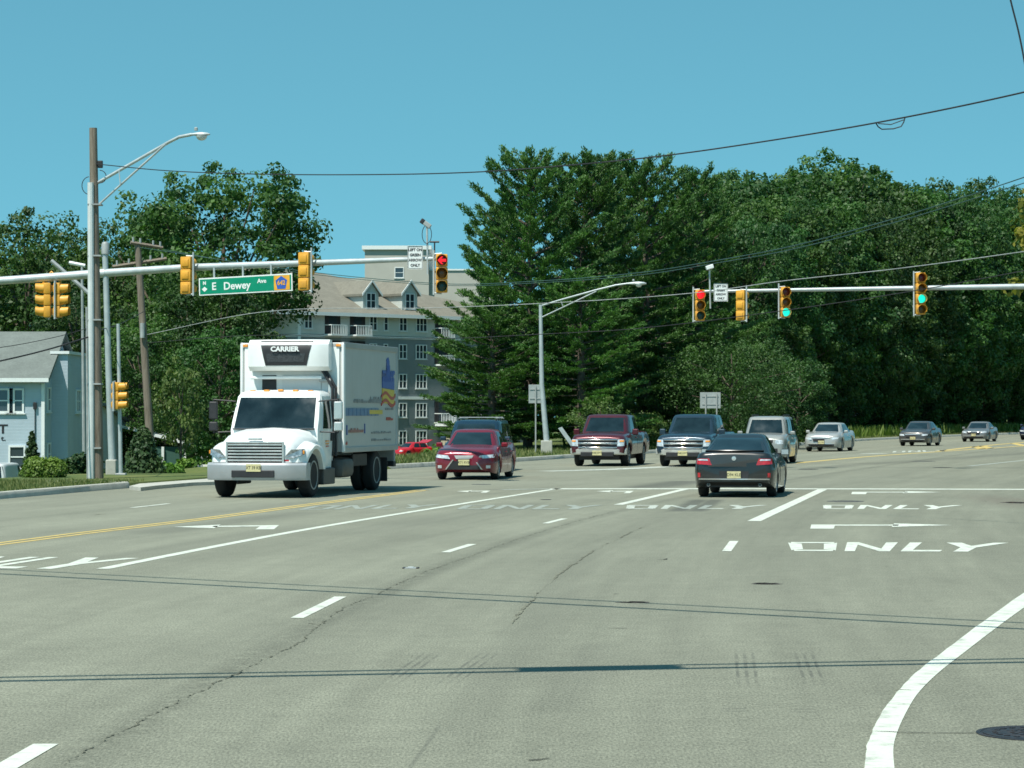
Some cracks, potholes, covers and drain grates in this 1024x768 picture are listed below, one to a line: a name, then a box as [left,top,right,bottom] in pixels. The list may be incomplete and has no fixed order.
crack [65,515,597,764]
manhole cover [976,725,1024,741]
